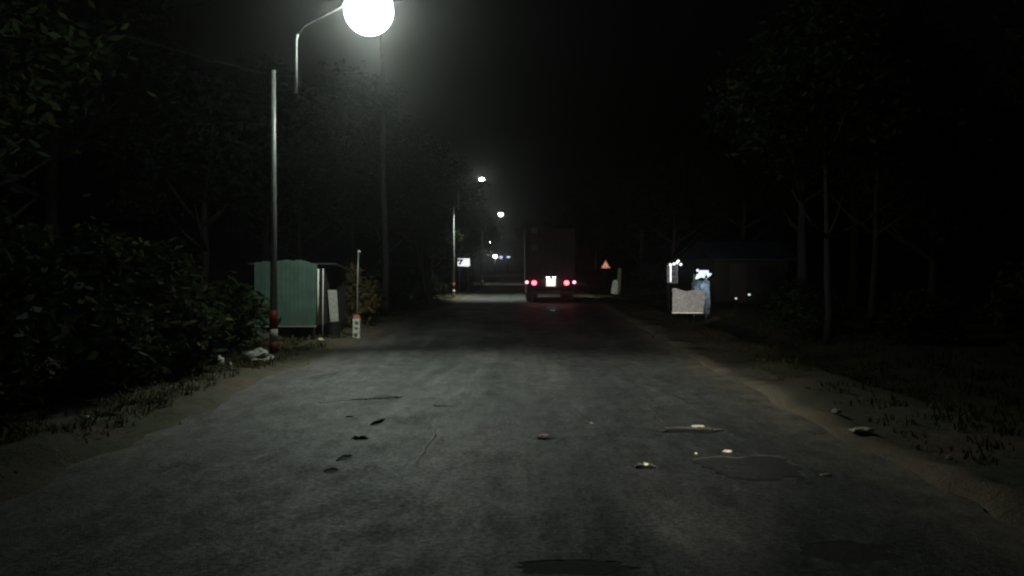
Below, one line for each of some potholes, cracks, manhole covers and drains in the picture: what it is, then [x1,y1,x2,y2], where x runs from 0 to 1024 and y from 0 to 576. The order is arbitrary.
pothole [655,426,730,434]
pothole [630,462,658,470]
crack [319,396,403,404]
crack [414,427,438,468]
